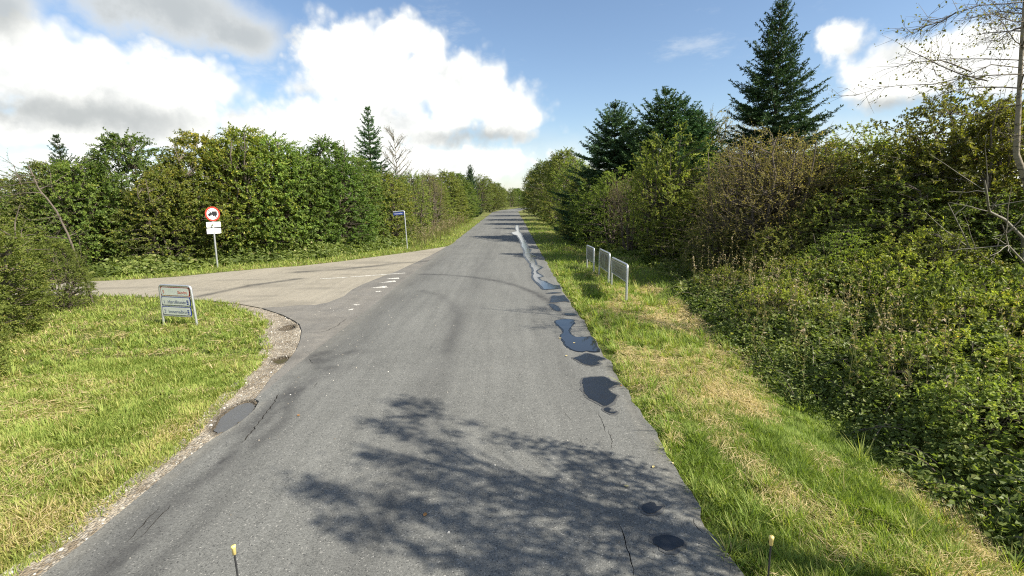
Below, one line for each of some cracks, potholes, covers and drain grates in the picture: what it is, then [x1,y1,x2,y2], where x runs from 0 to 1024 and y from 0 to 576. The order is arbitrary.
crack [120,506,170,556]
crack [242,394,279,442]
pothole [211,401,257,434]
